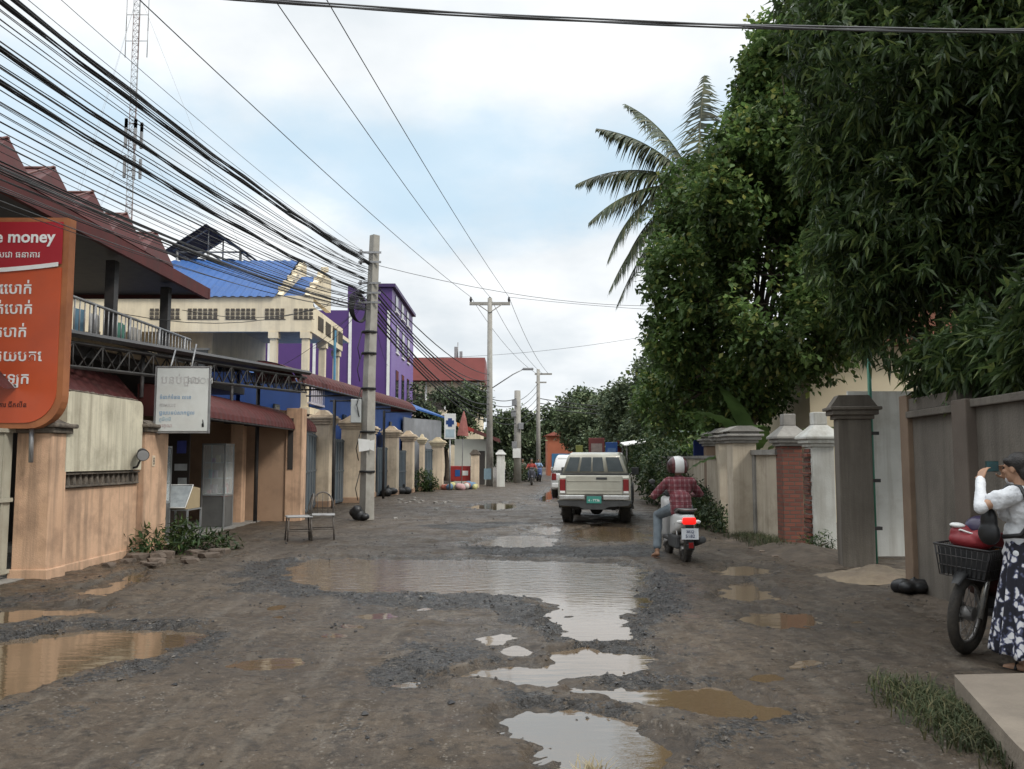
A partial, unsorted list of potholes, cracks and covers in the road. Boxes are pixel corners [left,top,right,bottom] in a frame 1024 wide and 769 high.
pothole [217,651,316,673]
pothole [456,501,526,510]
pothole [704,562,787,577]
pothole [733,606,842,630]
pothole [427,640,673,690]
pothole [0,622,222,701]
pothole [273,554,661,647]
pothole [42,566,157,596]
pothole [705,578,789,602]
pothole [459,533,565,548]
pothole [481,696,705,769]
pothole [515,523,568,536]
